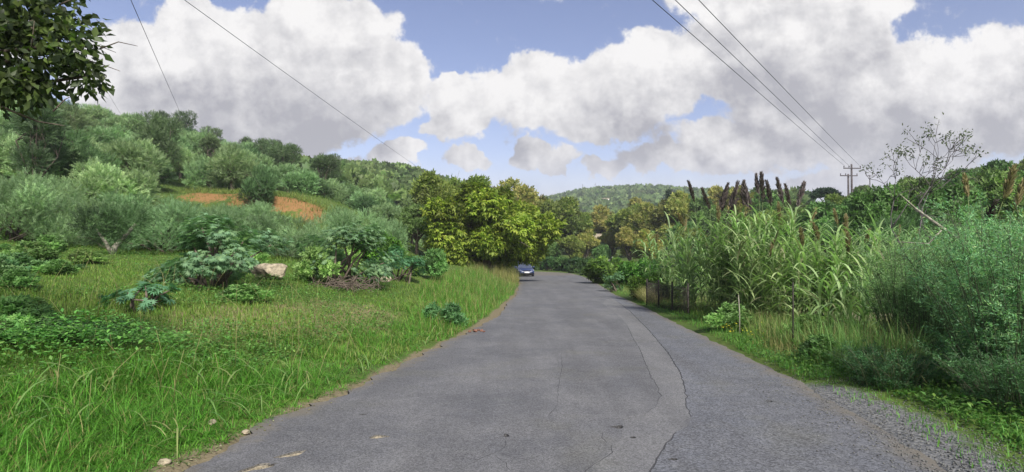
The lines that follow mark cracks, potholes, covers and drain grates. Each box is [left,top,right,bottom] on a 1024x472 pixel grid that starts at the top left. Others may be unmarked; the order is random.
crack [455,440,538,470]
